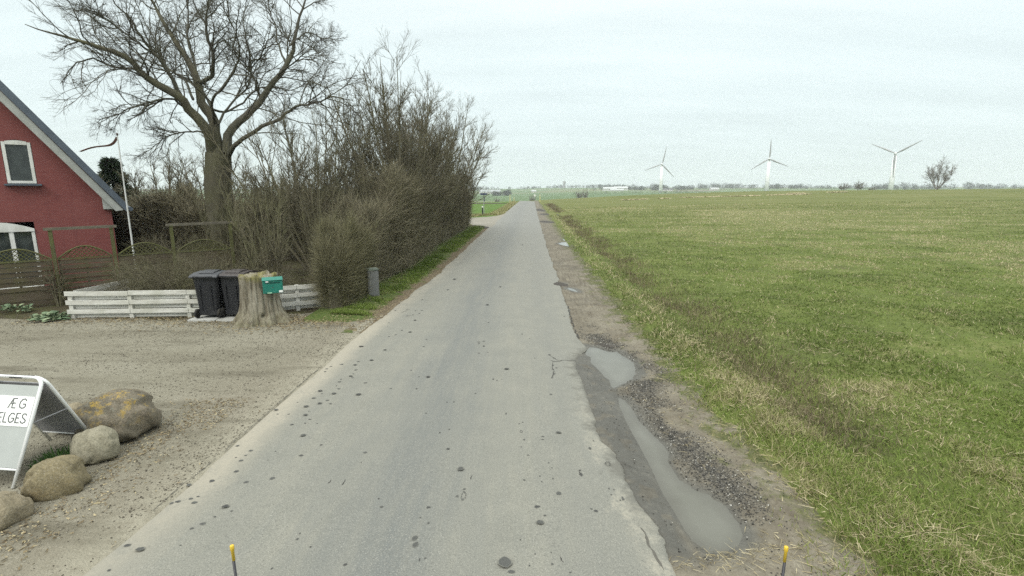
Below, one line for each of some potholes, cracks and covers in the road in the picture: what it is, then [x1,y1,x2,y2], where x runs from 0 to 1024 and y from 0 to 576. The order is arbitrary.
pothole [607,391,763,565]
crack [640,527,664,569]
pothole [580,344,645,391]
